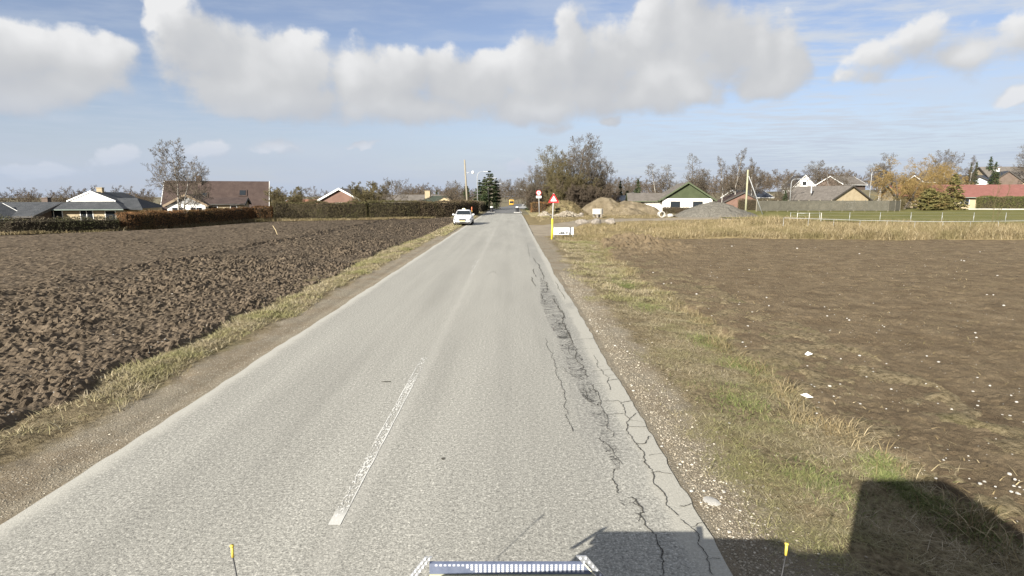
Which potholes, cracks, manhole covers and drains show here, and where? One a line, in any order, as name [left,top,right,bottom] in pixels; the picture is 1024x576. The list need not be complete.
crack [528,249,719,575]
